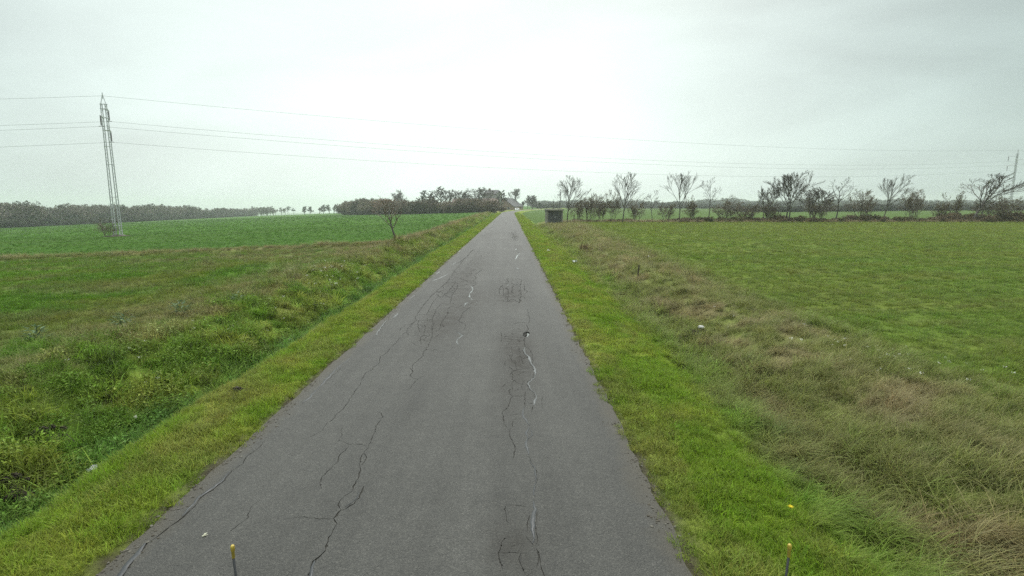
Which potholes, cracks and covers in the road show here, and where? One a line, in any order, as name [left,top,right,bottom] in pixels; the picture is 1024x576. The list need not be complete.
crack [313,232,545,576]
crack [285,411,383,576]
